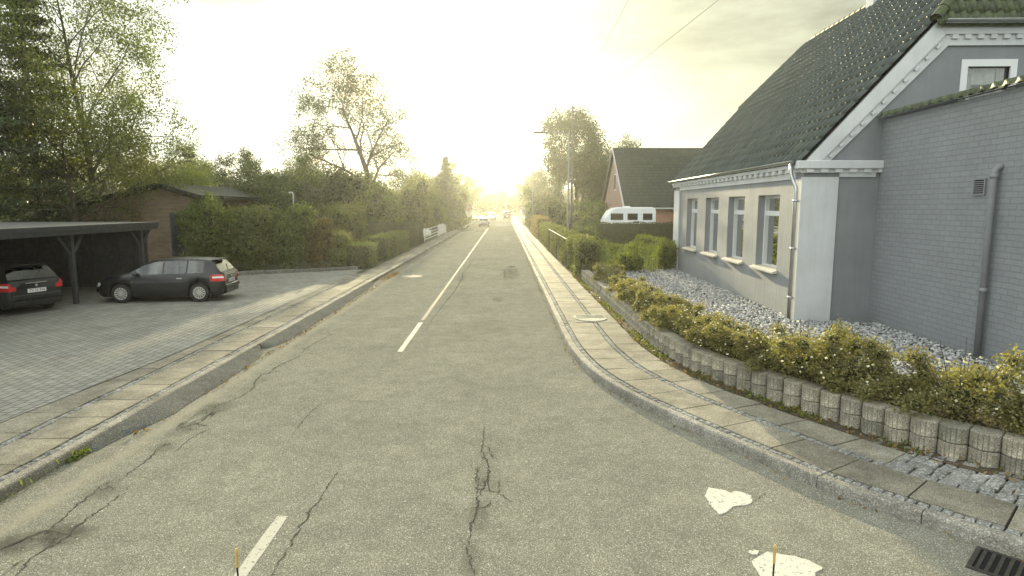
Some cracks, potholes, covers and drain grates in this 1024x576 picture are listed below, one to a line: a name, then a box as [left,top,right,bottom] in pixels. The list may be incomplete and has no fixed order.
crack [208,334,333,406]
crack [1,405,220,576]
crack [466,428,513,573]
crack [271,466,342,575]
drain grate [965,546,1024,576]
manhole cover [571,315,611,323]
